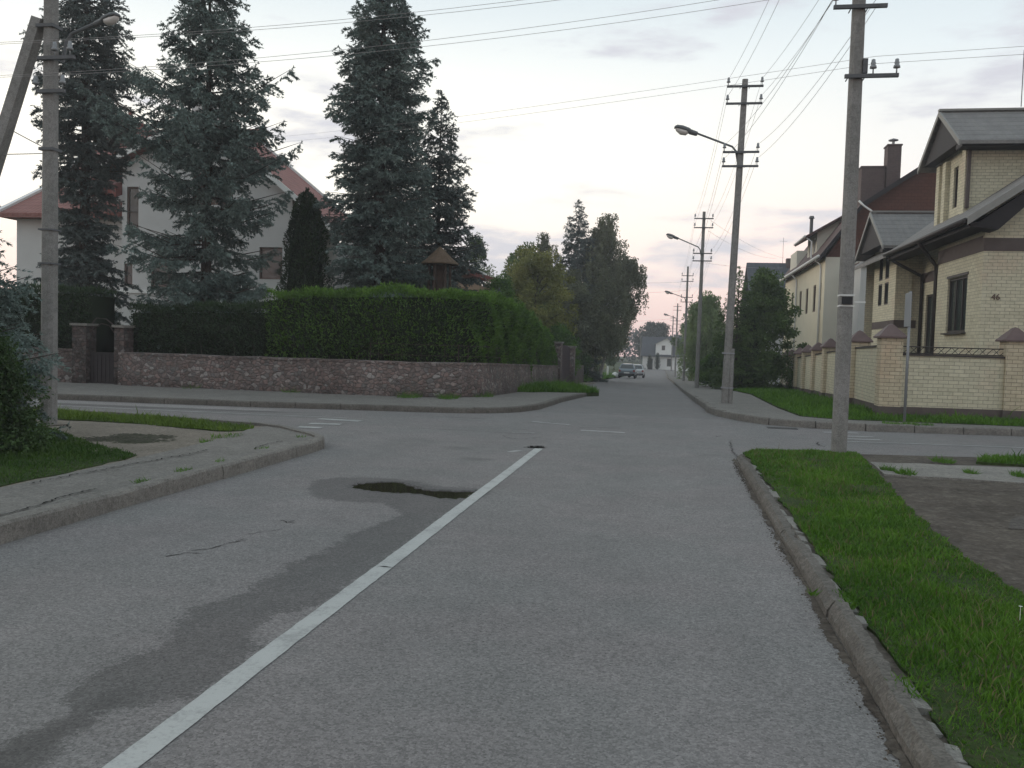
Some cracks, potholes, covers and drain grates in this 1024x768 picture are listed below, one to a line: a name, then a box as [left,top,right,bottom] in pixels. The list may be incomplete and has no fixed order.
pothole [346,481,479,500]
